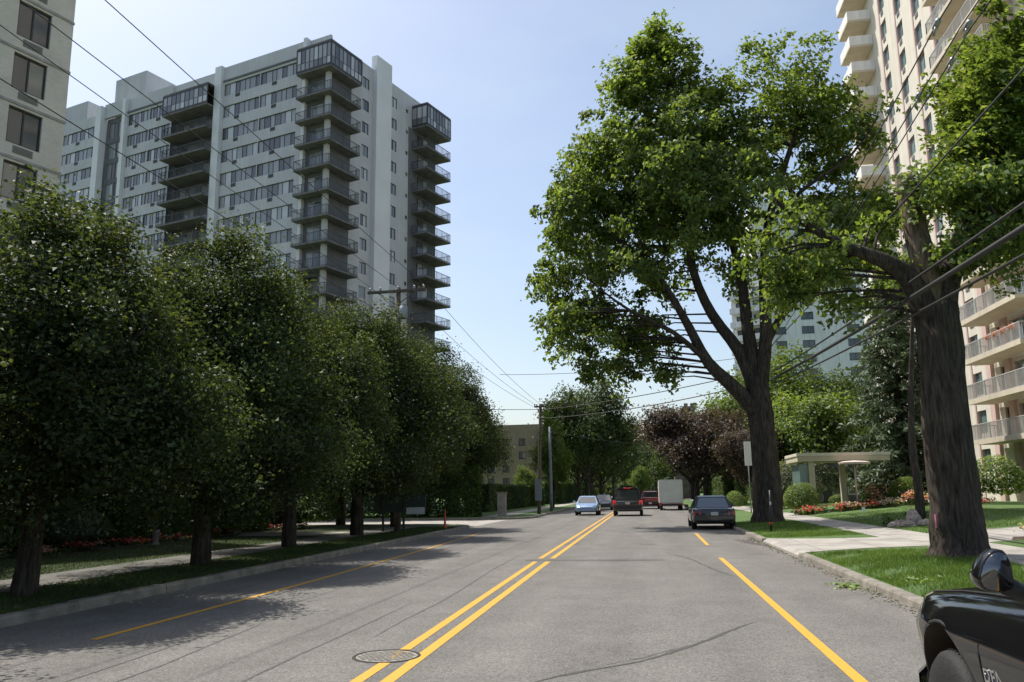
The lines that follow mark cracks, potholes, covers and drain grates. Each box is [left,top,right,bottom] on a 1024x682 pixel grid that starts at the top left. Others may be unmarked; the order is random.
crack [534,621,759,682]
manhole cover [352,649,421,663]
